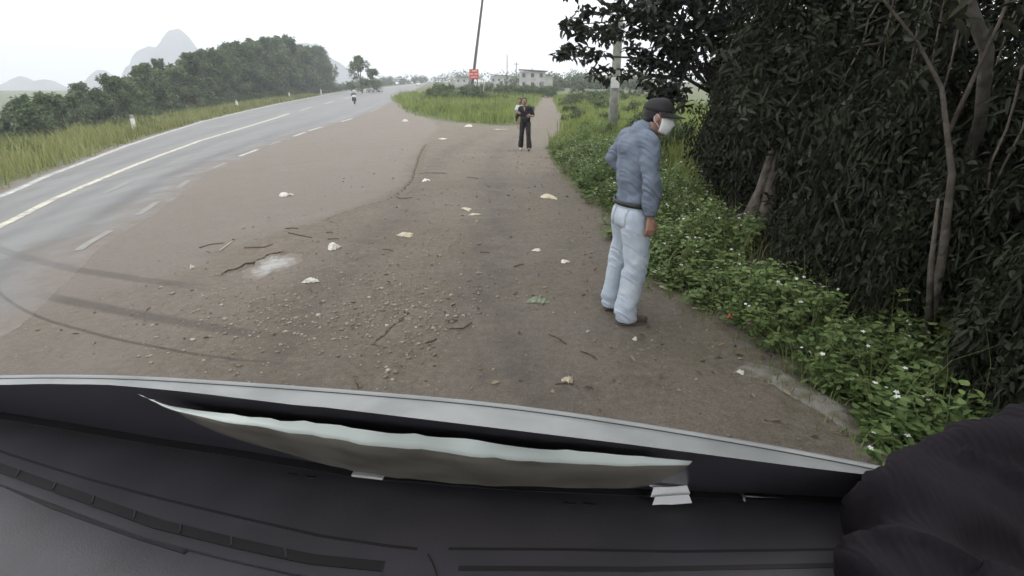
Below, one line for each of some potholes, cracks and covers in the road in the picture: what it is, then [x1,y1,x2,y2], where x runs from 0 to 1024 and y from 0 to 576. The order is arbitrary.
crack [369,308,428,347]
crack [324,144,448,221]
crack [211,250,286,276]
